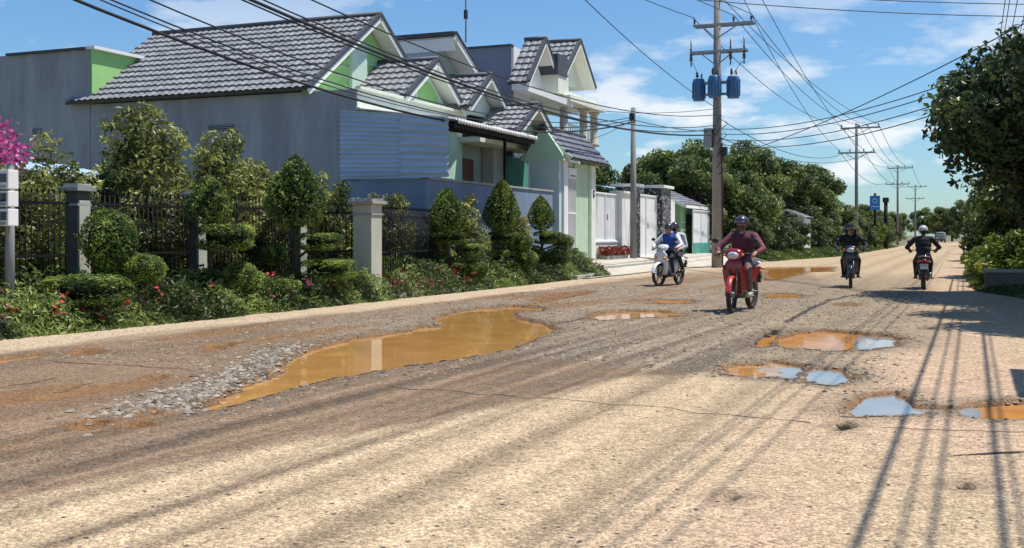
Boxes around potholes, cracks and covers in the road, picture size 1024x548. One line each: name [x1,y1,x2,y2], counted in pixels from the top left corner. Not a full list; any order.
crack [384,384,811,423]
pothole [585,309,686,321]
pothole [196,304,562,410]
pothole [764,266,834,281]
pothole [716,359,812,380]
pothole [757,329,880,351]
pothole [941,396,1024,423]
